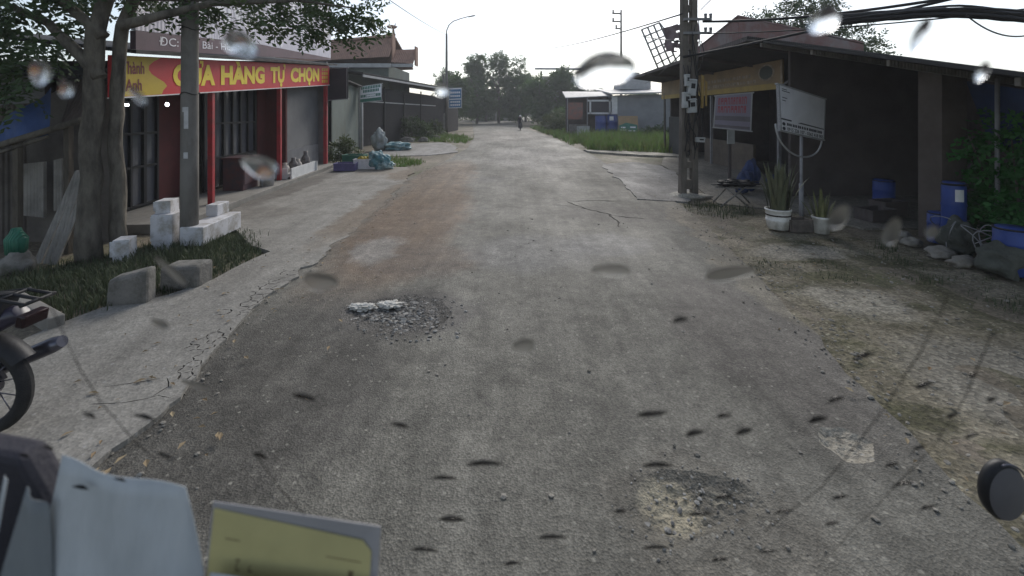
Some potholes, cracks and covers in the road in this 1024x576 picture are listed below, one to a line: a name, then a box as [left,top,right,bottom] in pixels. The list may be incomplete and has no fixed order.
crack [564,200,644,228]
pothole [339,294,468,344]
crack [100,270,296,404]
pothole [612,464,788,562]
